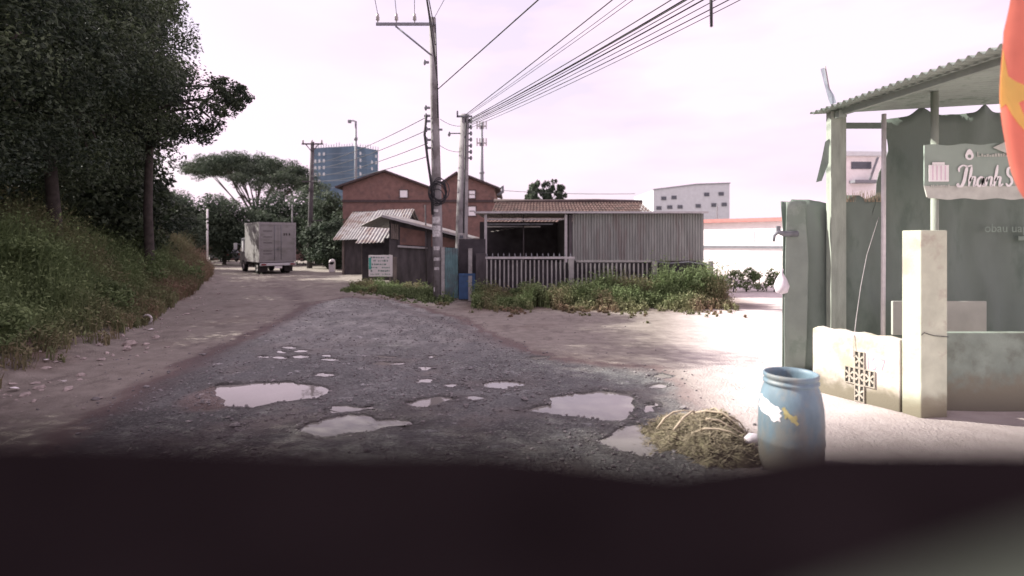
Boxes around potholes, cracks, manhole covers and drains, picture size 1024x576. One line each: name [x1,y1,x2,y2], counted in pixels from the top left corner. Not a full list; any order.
pothole [397,394,468,409]
pothole [291,411,425,429]
pothole [204,379,337,409]
pothole [591,420,677,450]
pothole [321,404,377,414]
pothole [475,379,532,391]
pothole [514,388,646,426]
